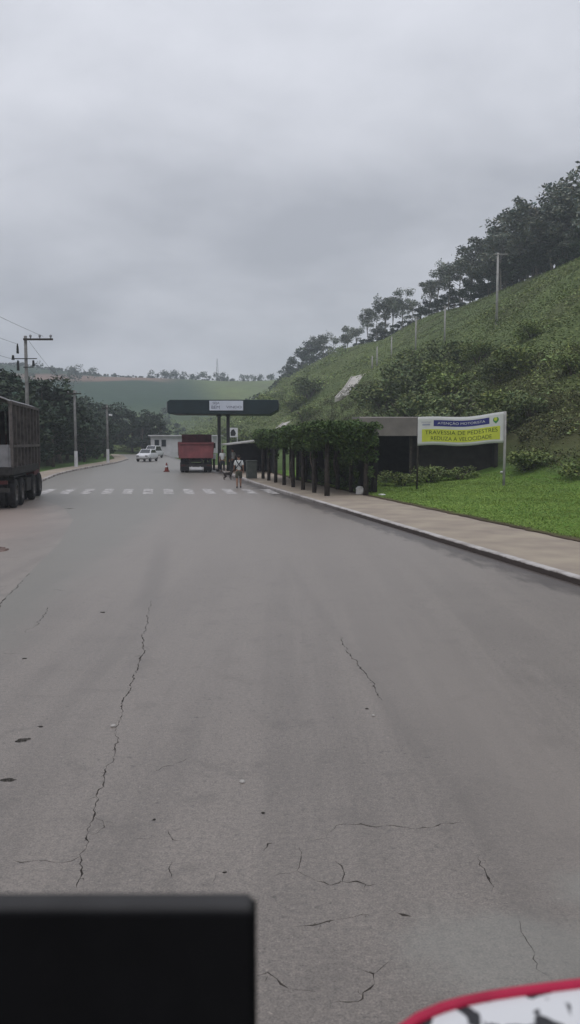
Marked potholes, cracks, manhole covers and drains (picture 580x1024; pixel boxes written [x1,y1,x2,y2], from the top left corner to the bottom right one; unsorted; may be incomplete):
crack [273,822,460,892]
crack [16,600,152,887]
crack [338,960,391,1003]
